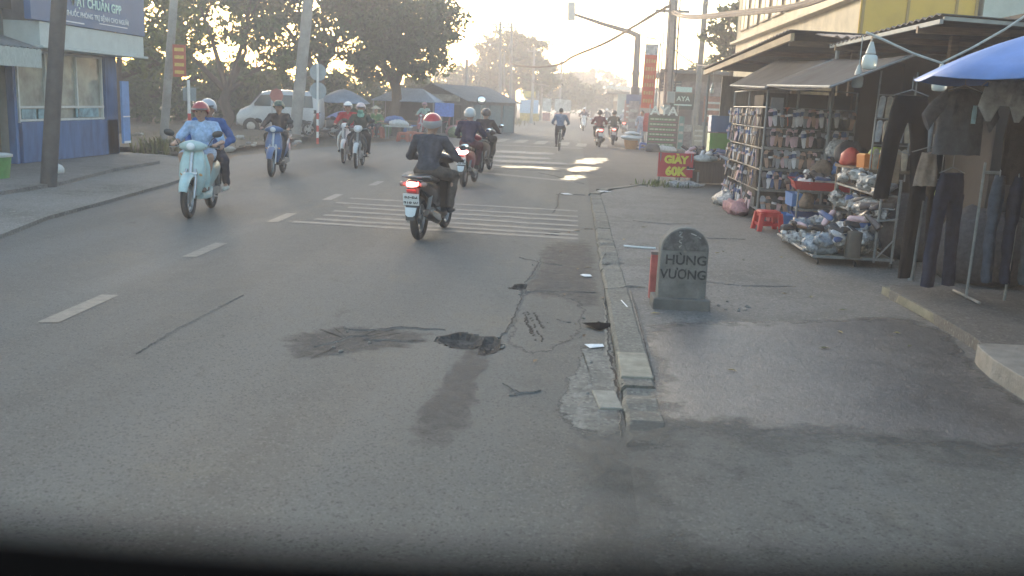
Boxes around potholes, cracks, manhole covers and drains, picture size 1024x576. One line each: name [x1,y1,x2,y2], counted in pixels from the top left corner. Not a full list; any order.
pothole [436,332,484,349]
crack [498,257,623,436]
pothole [478,336,501,356]
